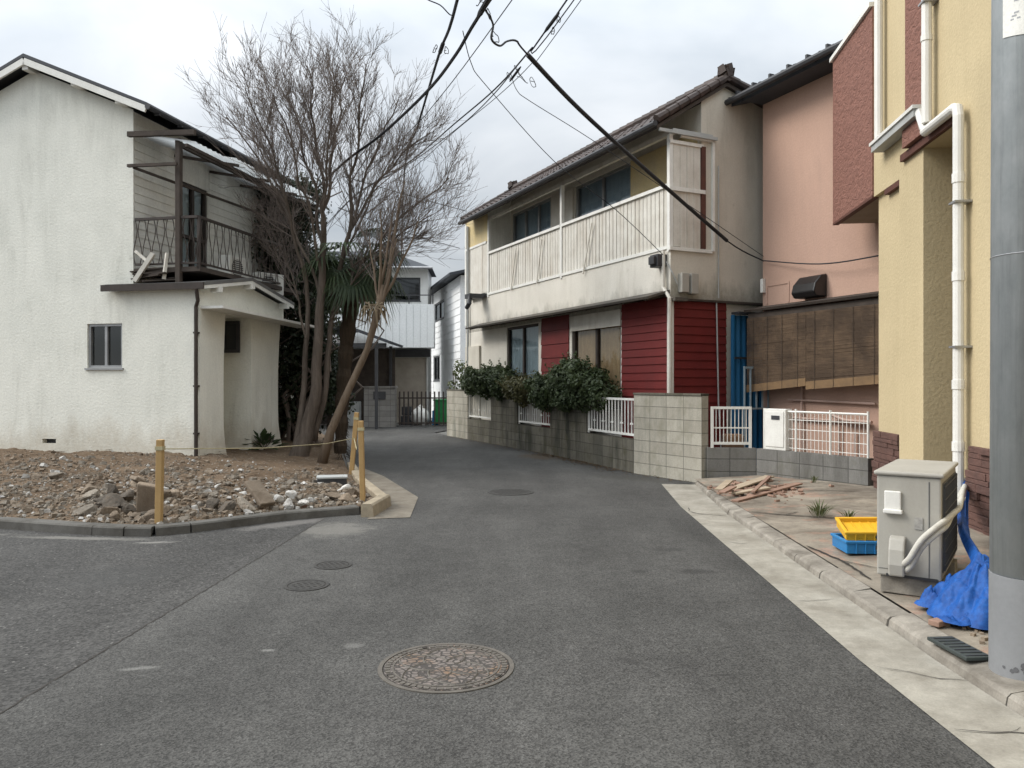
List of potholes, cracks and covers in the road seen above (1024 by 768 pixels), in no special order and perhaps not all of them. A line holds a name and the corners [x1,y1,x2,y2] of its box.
manhole cover [284,579,329,591]
manhole cover [377,643,514,694]
manhole cover [314,560,352,570]
